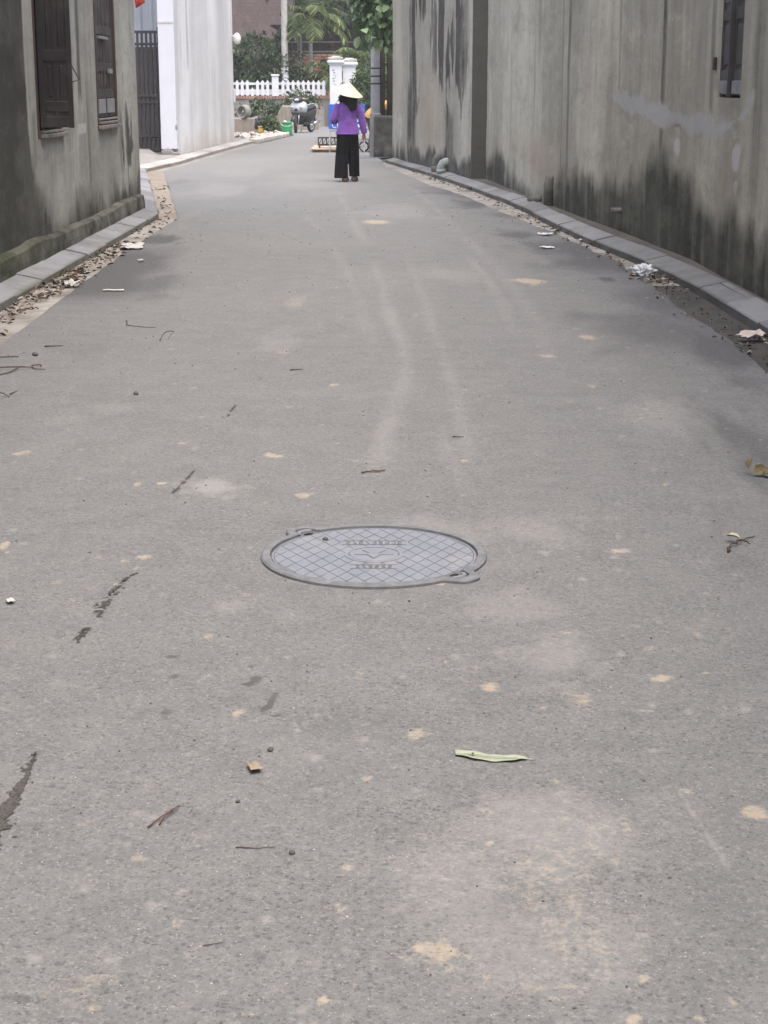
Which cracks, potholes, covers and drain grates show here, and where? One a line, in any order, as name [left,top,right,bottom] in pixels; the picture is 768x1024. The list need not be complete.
crack [0,751,37,850]
crack [74,573,137,642]
manhole cover [261,524,487,590]
